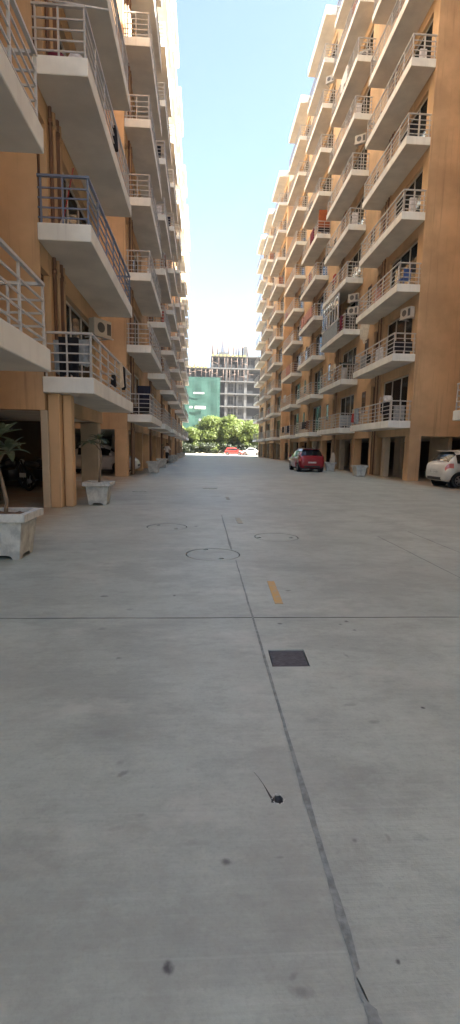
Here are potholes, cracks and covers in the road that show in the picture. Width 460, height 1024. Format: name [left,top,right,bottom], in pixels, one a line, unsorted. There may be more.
manhole cover [255,533,298,541]
manhole cover [186,549,240,561]
